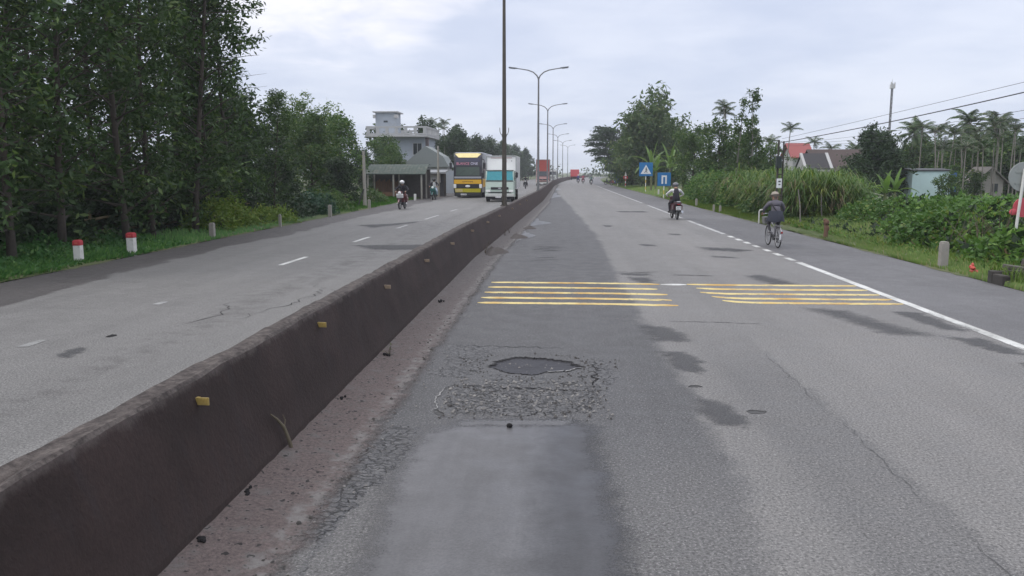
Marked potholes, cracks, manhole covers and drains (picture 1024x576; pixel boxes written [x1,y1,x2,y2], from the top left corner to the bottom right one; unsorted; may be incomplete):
crack [296,345,620,543]
pothole [488,356,585,375]
